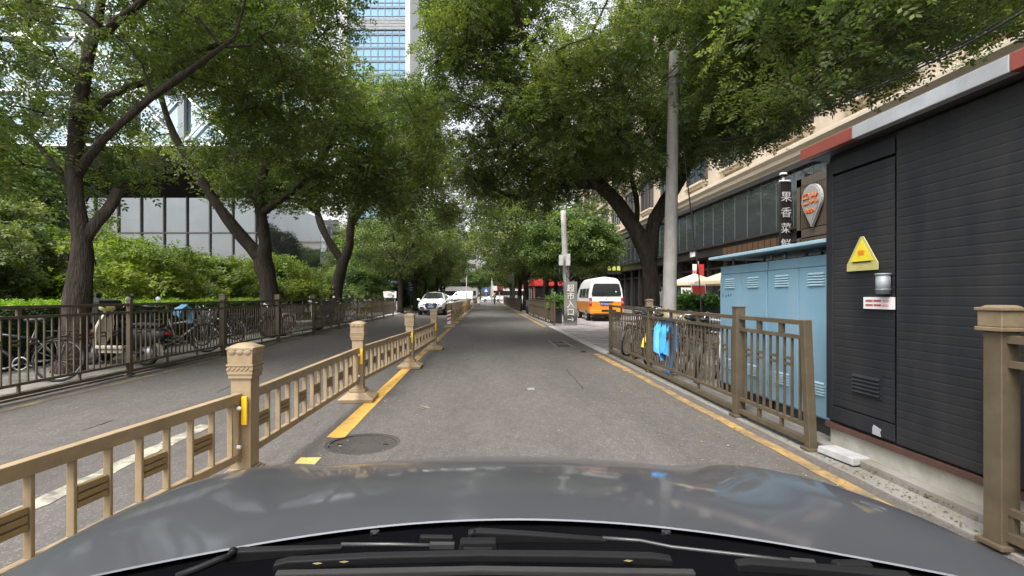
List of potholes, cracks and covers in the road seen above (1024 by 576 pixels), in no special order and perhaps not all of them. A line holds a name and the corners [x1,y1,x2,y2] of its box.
manhole cover [325,434,400,455]
